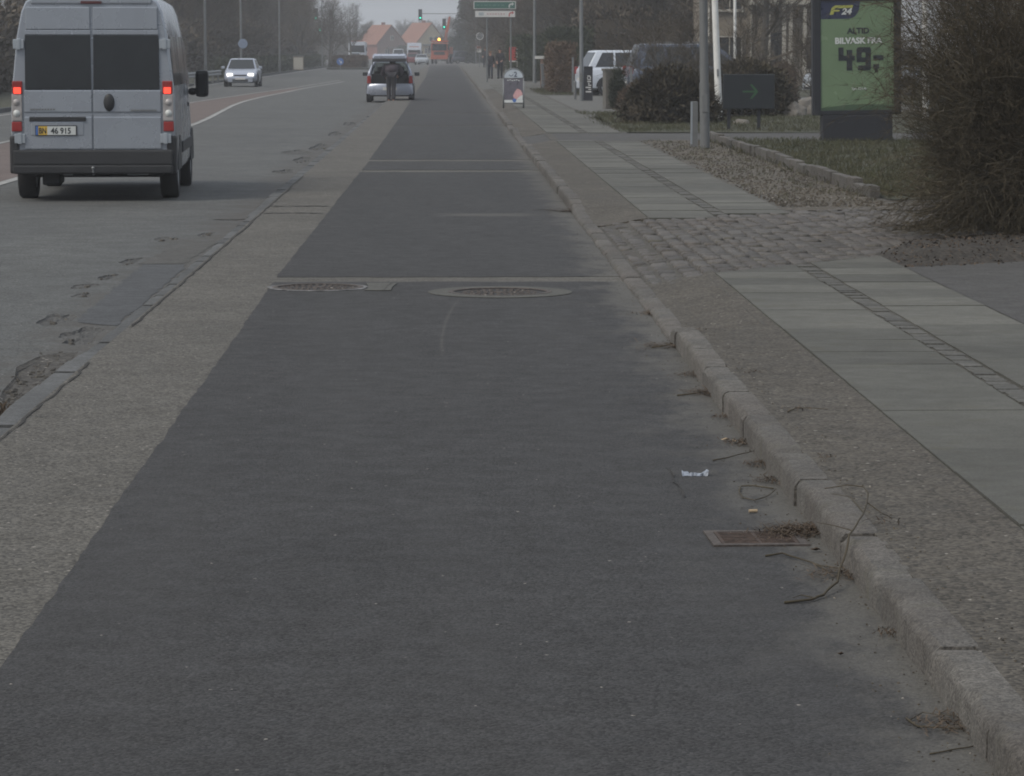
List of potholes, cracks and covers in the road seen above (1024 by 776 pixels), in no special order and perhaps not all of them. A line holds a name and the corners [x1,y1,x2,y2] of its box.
pothole [59,327,105,346]
manhole cover [428,286,572,298]
pothole [308,143,329,151]
pothole [0,352,78,409]
pothole [36,313,77,326]
manhole cover [268,283,368,291]
drain grate [703,530,811,547]
